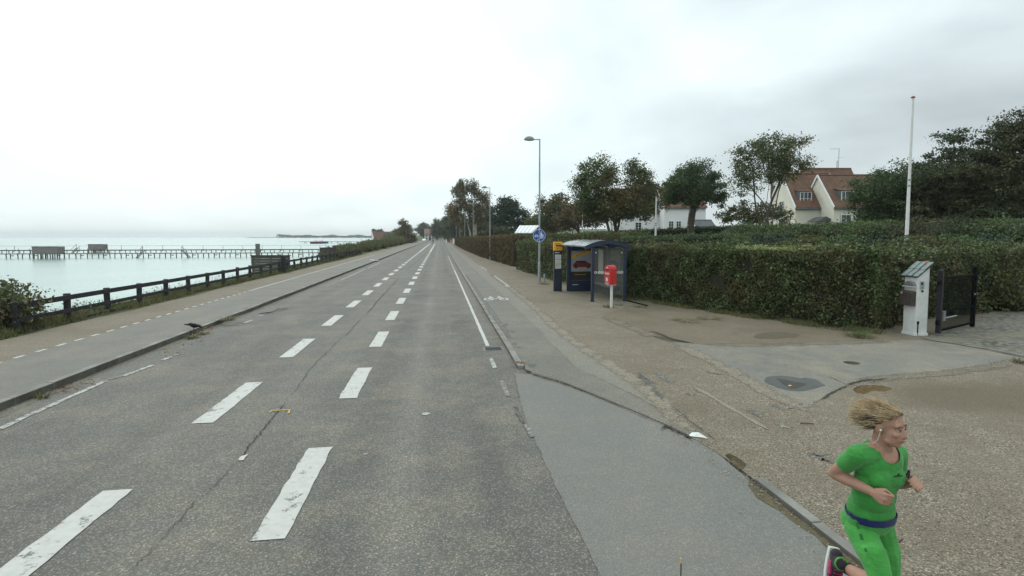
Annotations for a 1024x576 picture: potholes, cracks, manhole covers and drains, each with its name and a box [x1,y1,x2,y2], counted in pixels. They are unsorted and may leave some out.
crack [637,372,713,439]
crack [128,401,286,574]
